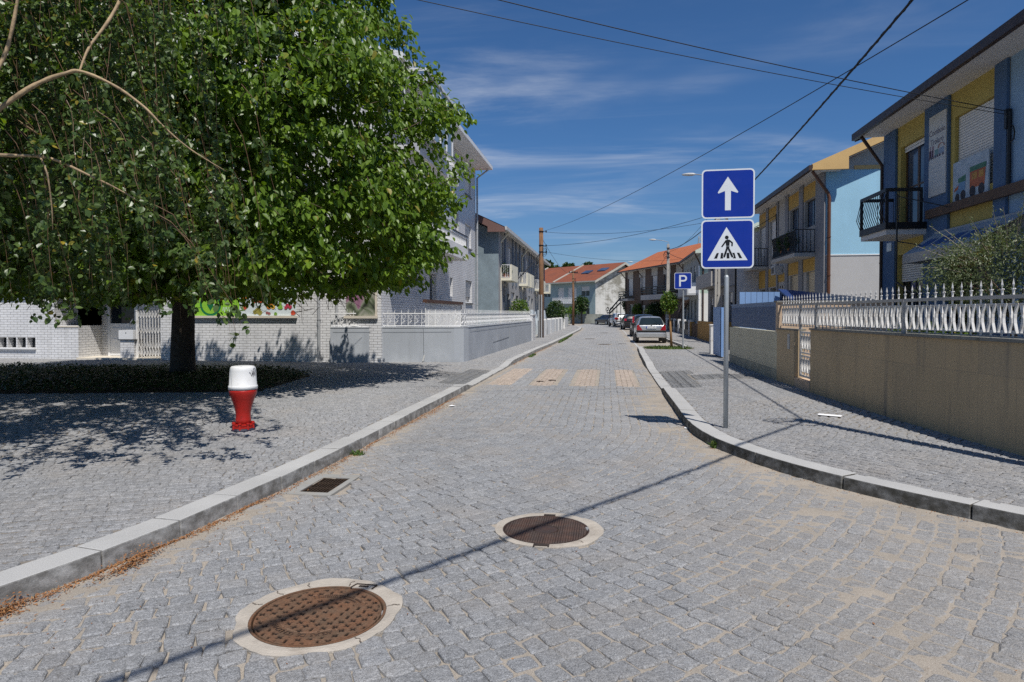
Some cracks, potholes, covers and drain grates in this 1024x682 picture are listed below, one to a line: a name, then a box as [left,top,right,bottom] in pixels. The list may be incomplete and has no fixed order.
manhole cover [495,513,604,550]
drain grate [279,474,361,498]
manhole cover [232,578,403,660]
